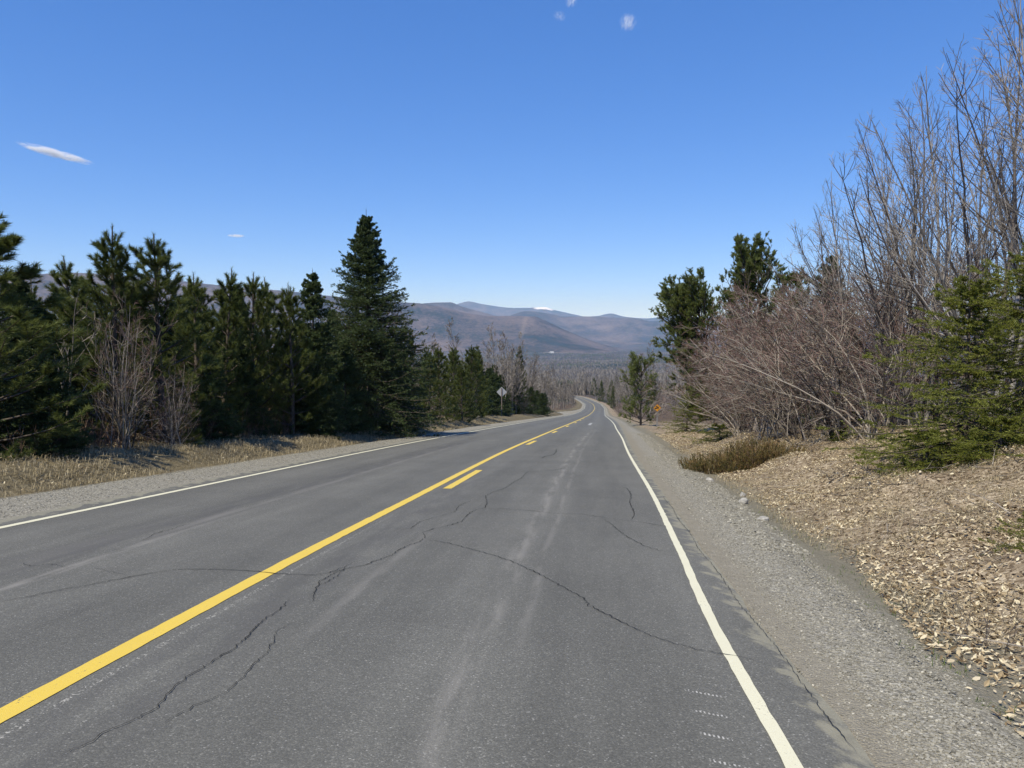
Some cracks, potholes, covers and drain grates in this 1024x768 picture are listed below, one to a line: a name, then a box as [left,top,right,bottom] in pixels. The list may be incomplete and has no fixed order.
crack [5,475,856,751]
